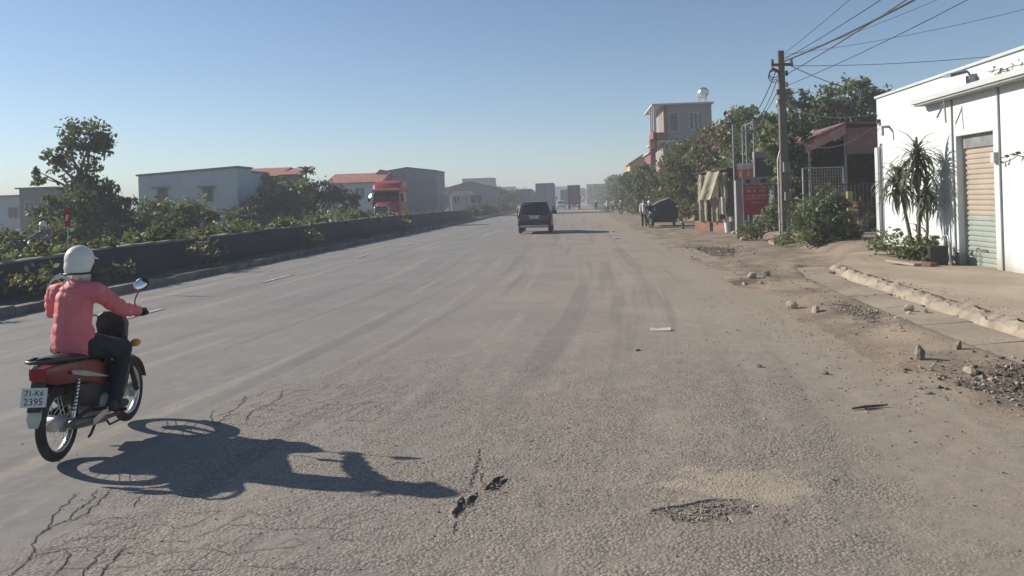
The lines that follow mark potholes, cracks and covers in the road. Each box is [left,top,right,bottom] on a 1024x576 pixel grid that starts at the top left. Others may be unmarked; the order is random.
pothole [637,498,780,526]
pothole [448,488,481,524]
crack [1,489,374,576]
pothole [481,473,512,497]
